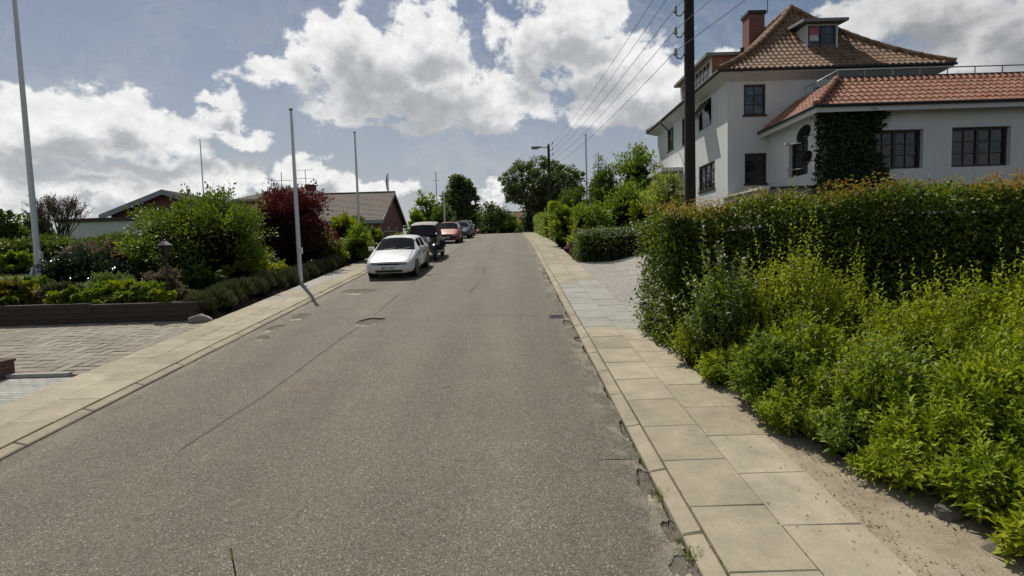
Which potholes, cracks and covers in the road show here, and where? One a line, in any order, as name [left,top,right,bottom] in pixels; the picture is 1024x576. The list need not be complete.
crack [582,346,690,564]
pothole [355,318,385,326]
